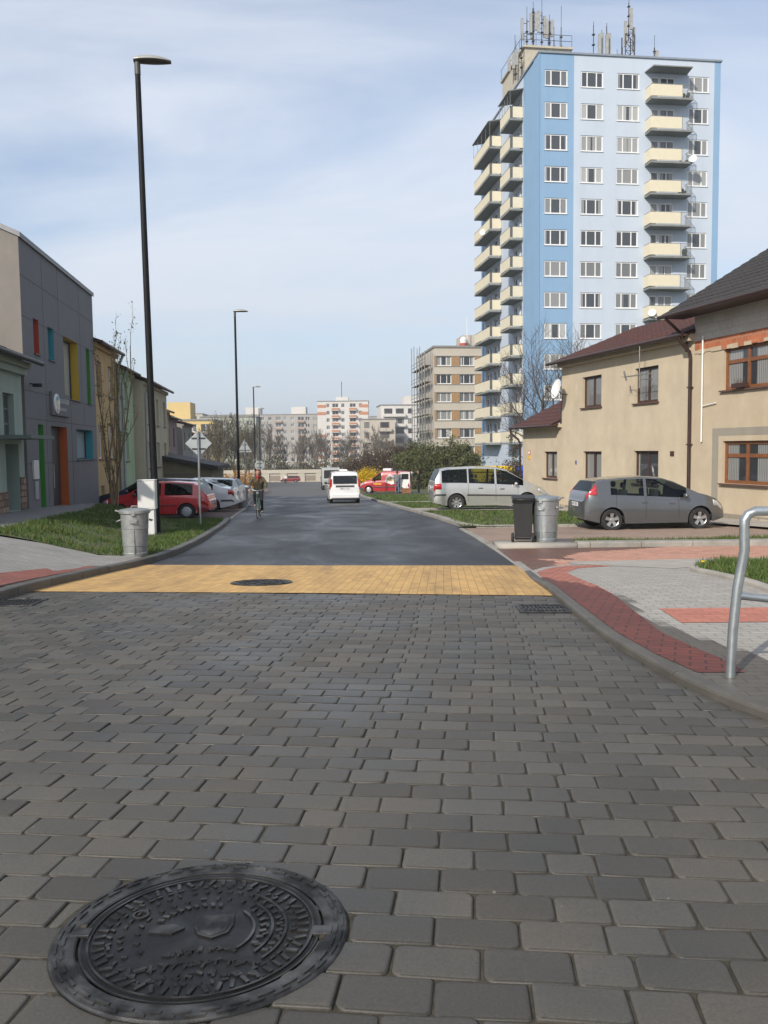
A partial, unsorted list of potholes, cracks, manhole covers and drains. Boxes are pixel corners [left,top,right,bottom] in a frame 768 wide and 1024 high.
manhole cover [38,863,355,1024]
drain grate [0,598,49,607]
drain grate [515,604,572,614]
